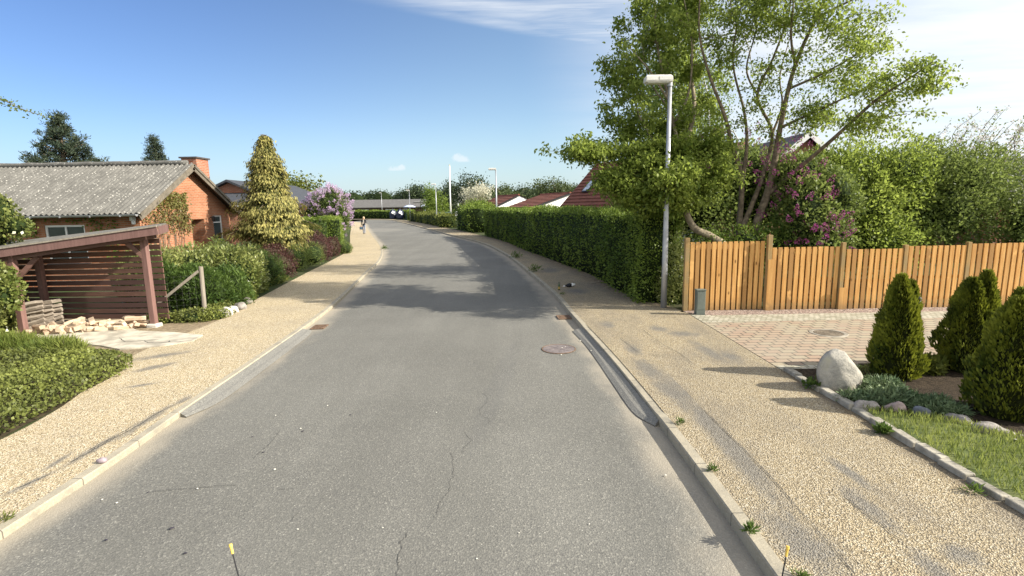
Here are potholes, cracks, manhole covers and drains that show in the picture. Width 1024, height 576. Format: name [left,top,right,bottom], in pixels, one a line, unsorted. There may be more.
manhole cover [808,329,849,337]
manhole cover [542,344,576,354]
